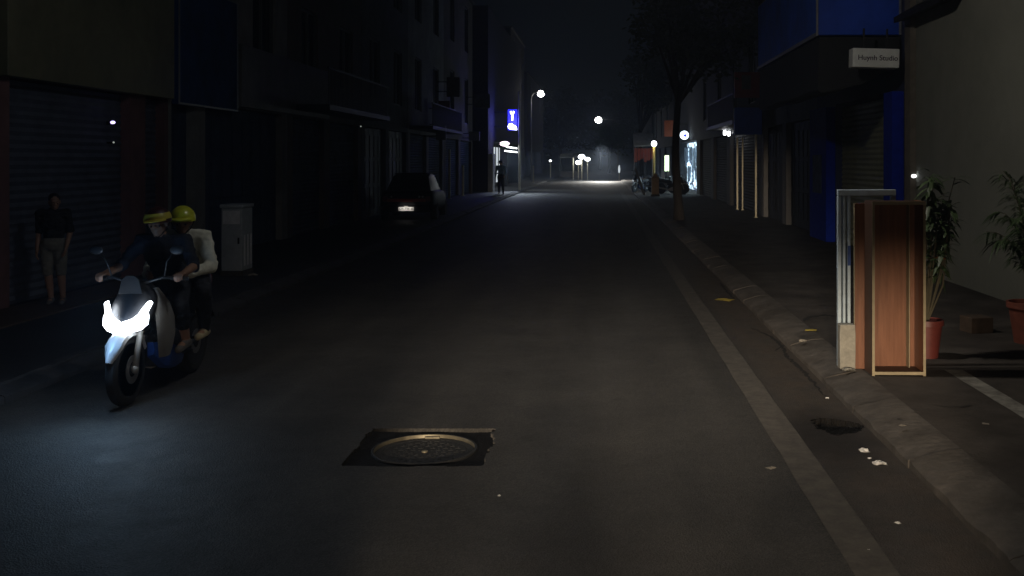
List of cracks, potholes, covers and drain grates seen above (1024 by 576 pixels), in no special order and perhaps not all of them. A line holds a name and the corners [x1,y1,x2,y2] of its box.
manhole cover [344,431,493,467]
crack [752,315,842,399]
pothole [810,418,865,436]
